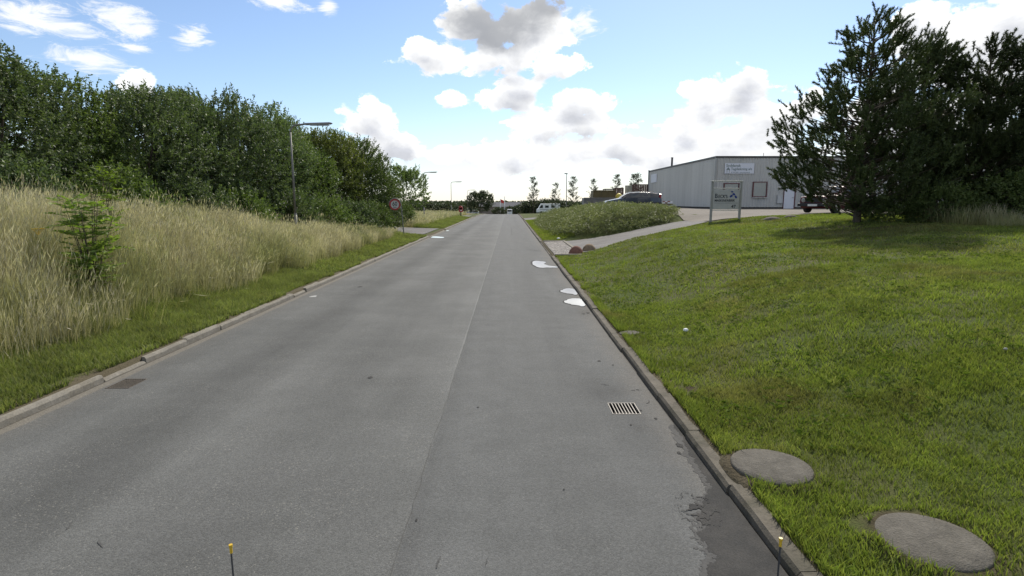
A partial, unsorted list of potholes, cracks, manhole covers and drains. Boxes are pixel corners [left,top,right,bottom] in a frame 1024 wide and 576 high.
manhole cover [875,513,996,573]
manhole cover [730,449,815,487]
drain grate [607,403,641,415]
drain grate [105,379,147,389]
